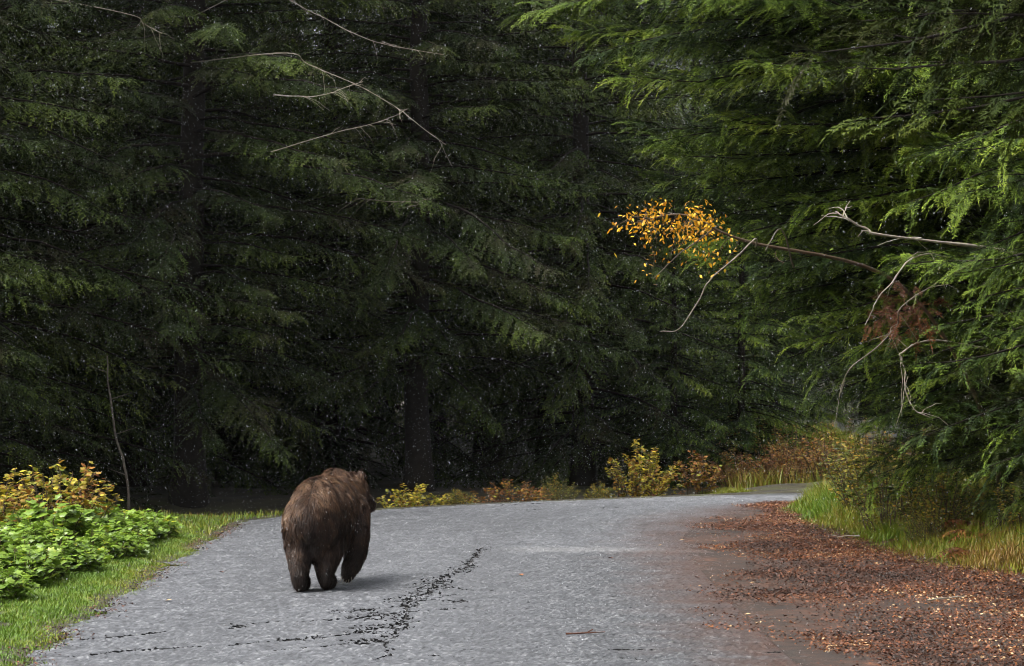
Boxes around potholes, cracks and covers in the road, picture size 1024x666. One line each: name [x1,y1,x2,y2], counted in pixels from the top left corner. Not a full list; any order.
crack [225,547,494,659]
crack [68,631,202,657]
